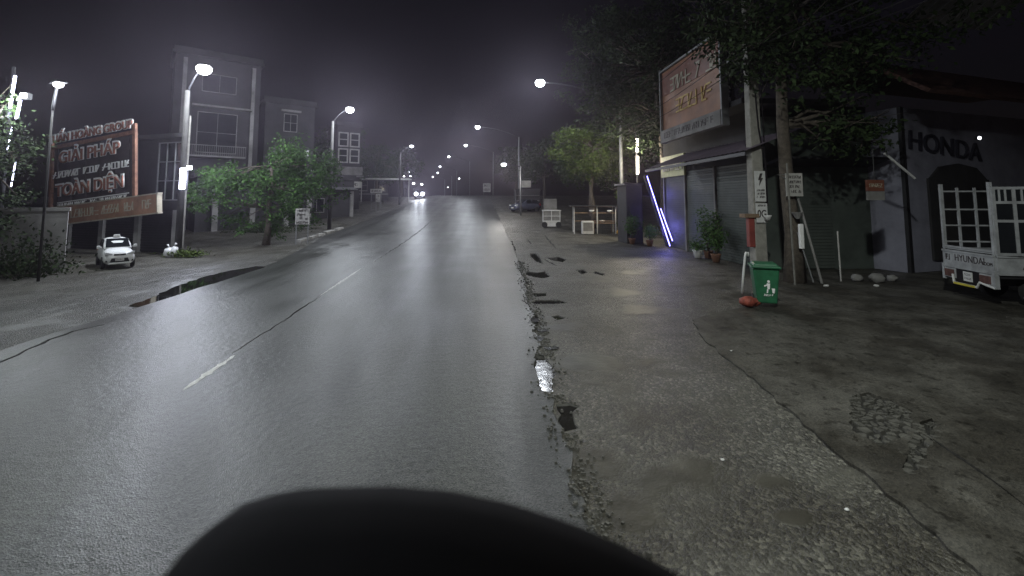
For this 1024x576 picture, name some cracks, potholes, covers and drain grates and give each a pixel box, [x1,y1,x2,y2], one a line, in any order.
pothole [531,353,557,396]
crack [843,393,1024,505]
pothole [556,402,580,432]
